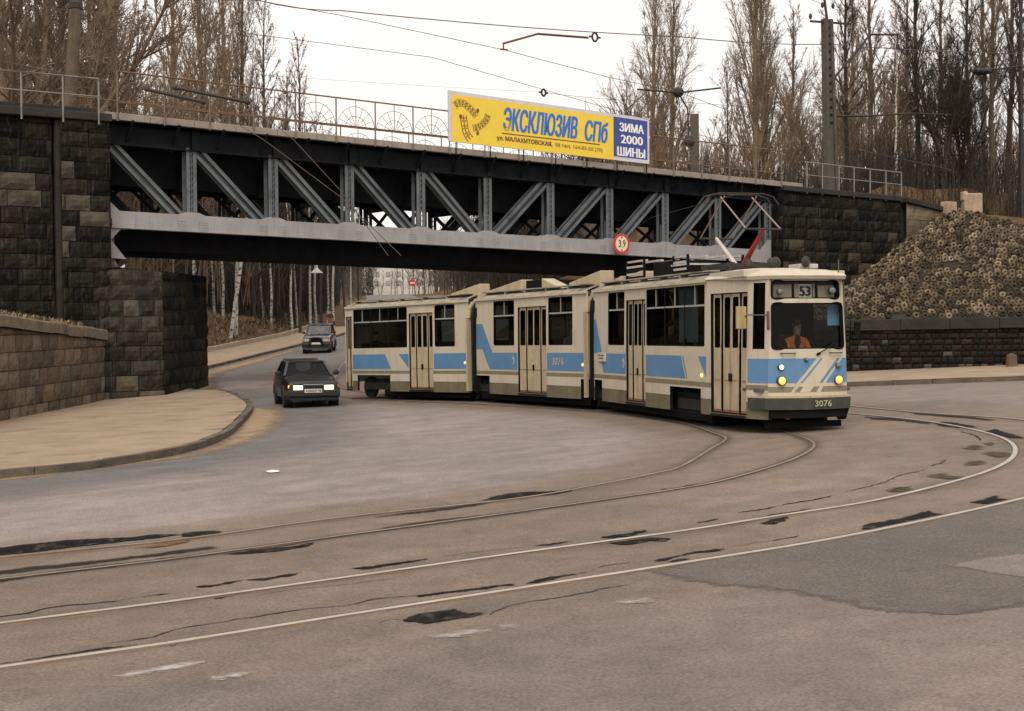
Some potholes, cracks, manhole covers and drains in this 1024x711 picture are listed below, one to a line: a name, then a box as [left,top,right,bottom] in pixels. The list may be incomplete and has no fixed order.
crack [738,463,941,517]
crack [489,584,629,615]
pothole [403,609,483,623]
crack [0,593,168,617]
